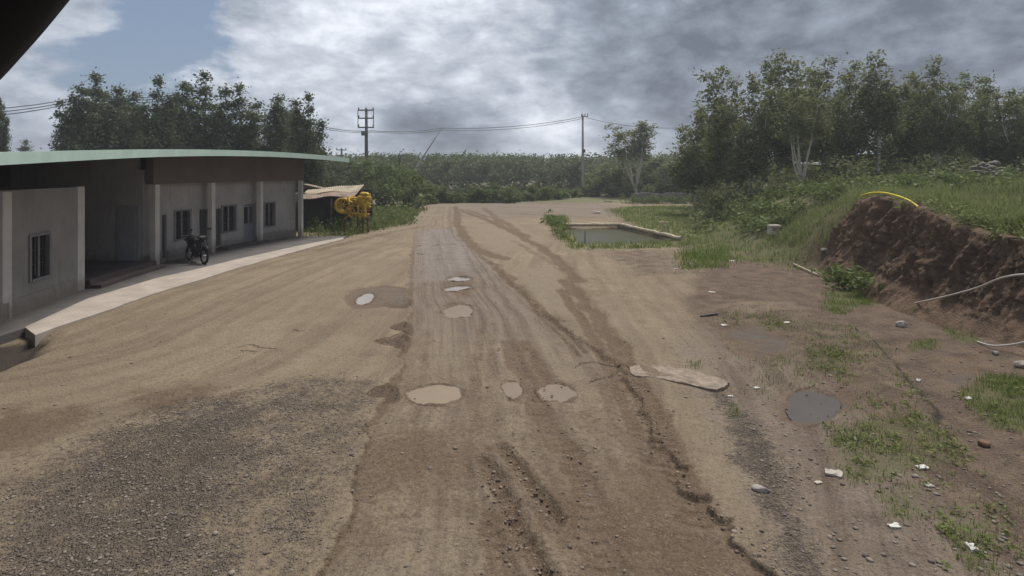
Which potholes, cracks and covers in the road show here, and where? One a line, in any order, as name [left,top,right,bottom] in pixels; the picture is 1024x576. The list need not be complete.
pothole [501,379,523,402]
pothole [354,293,376,306]
crack [575,361,629,383]
pothole [373,332,410,354]
pothole [439,304,476,319]
pothole [389,321,414,336]
crack [237,344,276,352]
pothole [534,382,580,403]
pothole [403,382,470,407]
pothole [366,383,400,404]
pothole [781,386,844,429]
